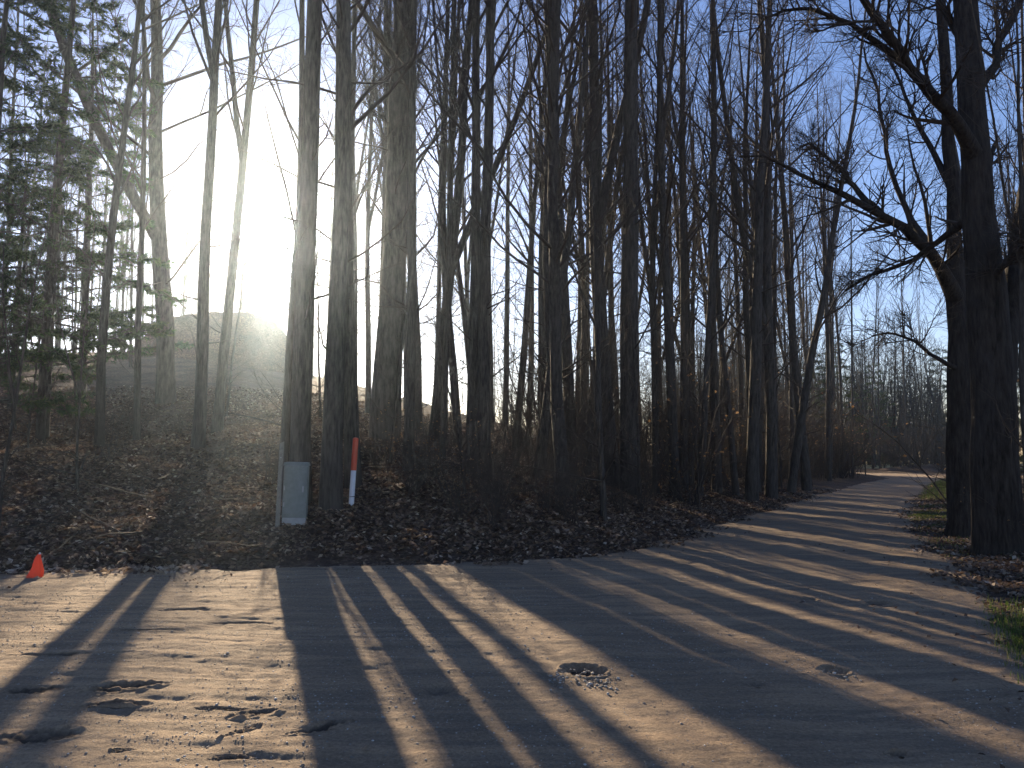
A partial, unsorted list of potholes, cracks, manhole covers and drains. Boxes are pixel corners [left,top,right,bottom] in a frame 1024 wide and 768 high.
pothole [813,663,854,676]
pothole [554,662,611,679]
